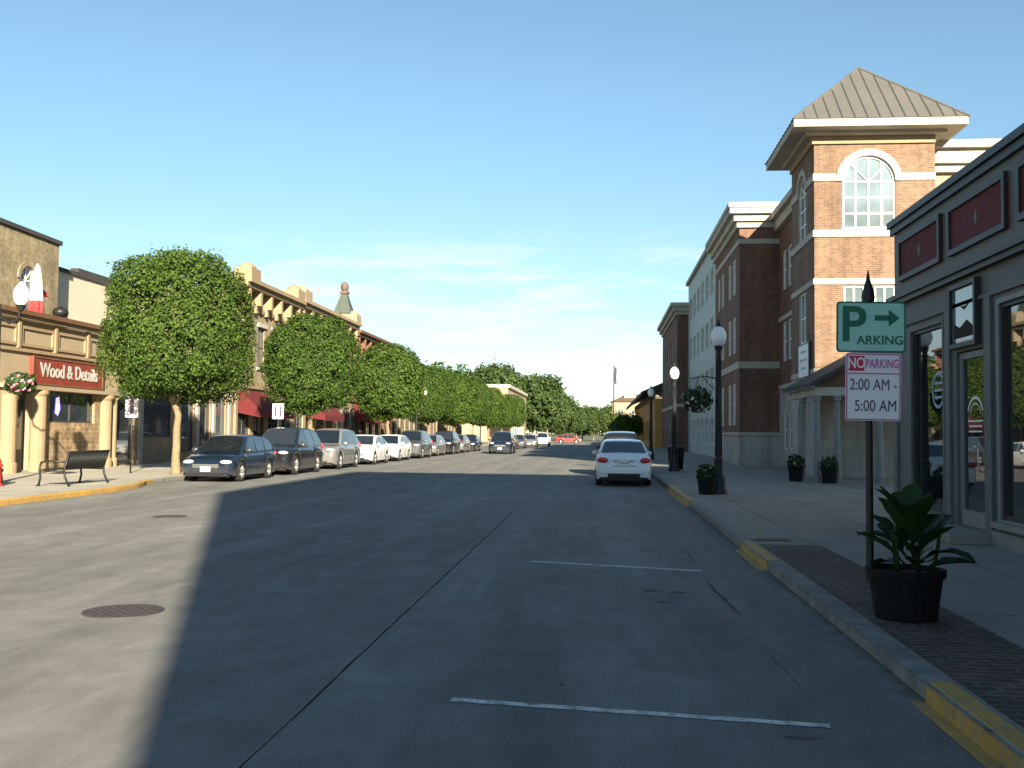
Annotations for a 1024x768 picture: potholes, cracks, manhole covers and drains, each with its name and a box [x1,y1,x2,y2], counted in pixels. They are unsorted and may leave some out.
crack [707,581,742,616]
manhole cover [81,604,165,618]
